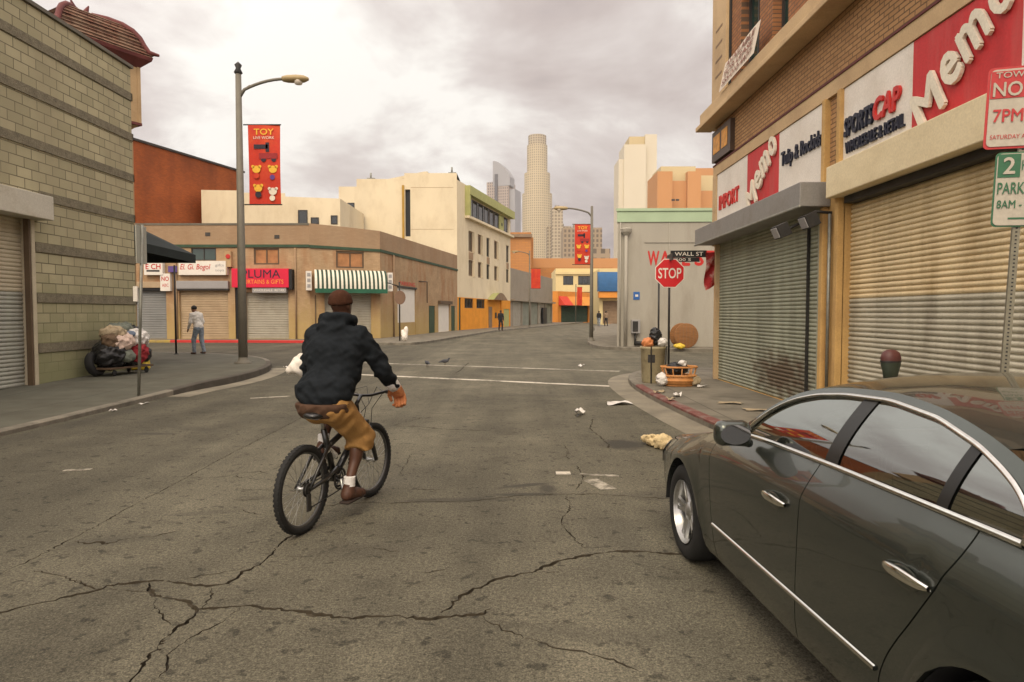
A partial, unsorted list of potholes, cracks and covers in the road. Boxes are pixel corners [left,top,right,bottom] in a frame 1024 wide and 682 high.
crack [0,445,683,682]
